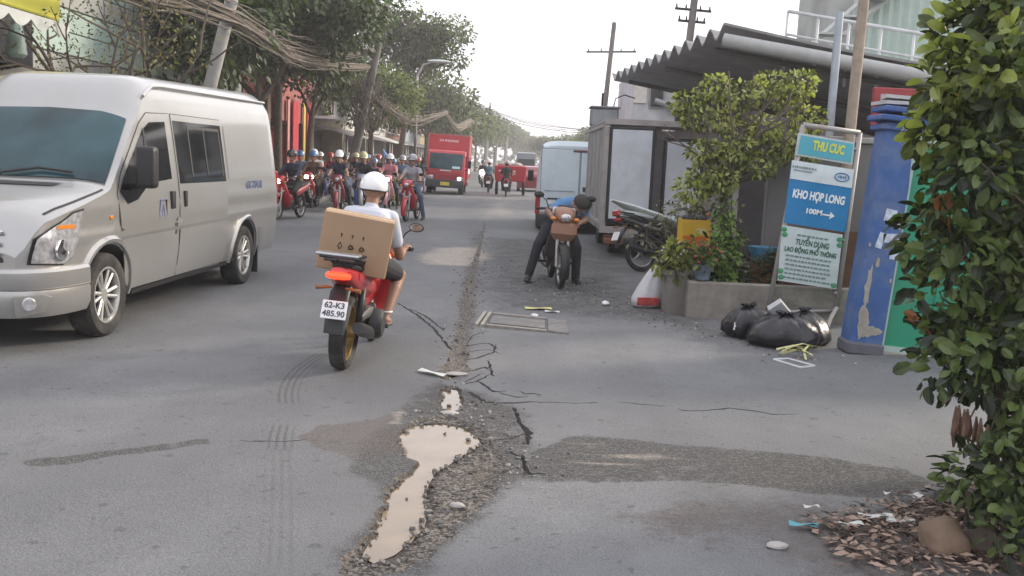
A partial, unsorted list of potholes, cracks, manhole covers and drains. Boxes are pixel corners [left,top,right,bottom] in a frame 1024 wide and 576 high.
manhole cover [475,311,569,334]
pothole [338,415,507,576]
pothole [437,385,465,412]
crack [398,303,785,475]
